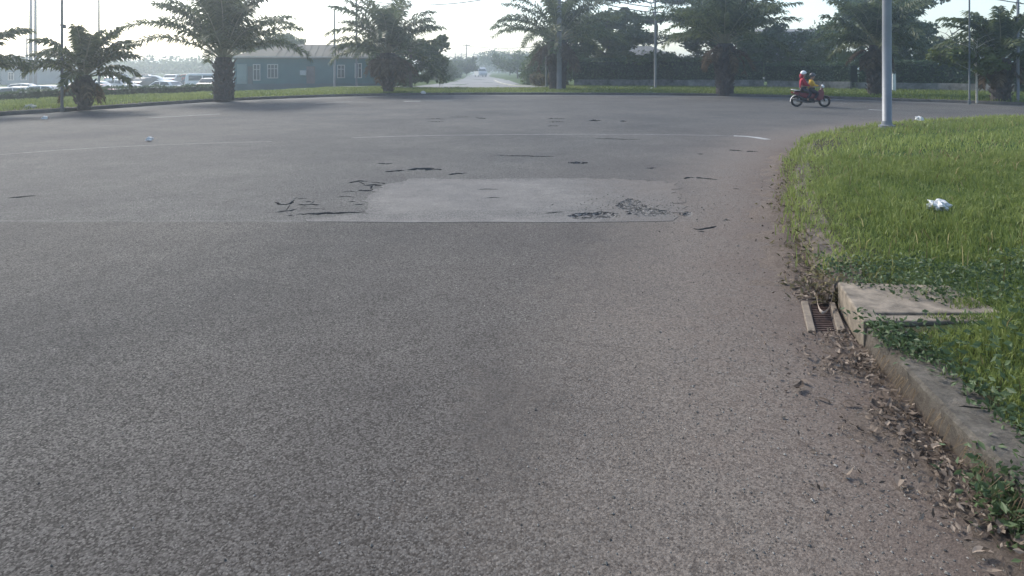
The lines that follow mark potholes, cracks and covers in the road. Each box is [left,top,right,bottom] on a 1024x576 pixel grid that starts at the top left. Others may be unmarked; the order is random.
pothole [616,199,671,217]
crack [274,163,392,216]
pothole [569,212,620,220]
drain grate [801,301,846,333]
